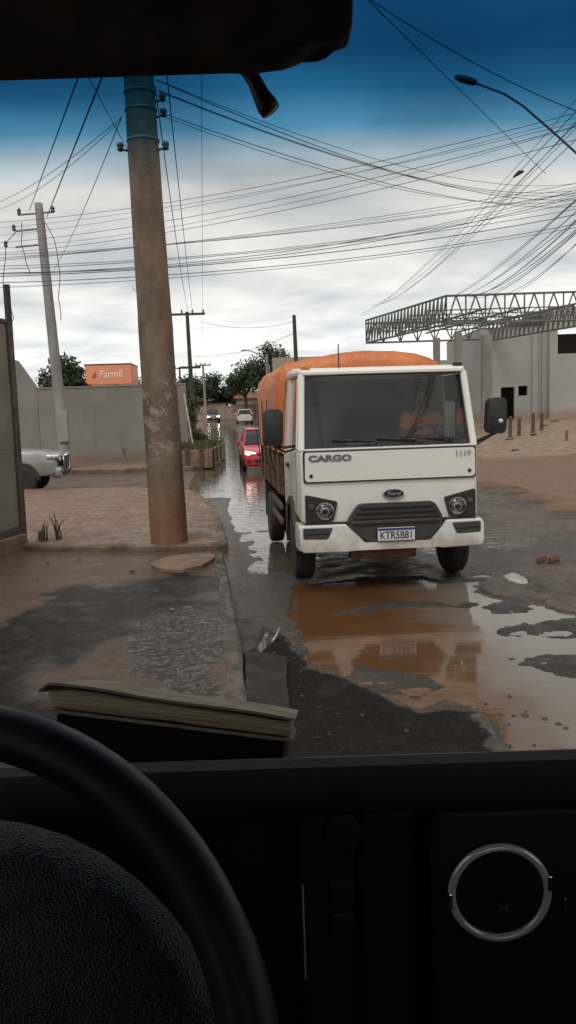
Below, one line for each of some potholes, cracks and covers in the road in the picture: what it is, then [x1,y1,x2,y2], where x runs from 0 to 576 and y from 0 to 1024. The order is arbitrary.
pothole [283,575,576,751]
